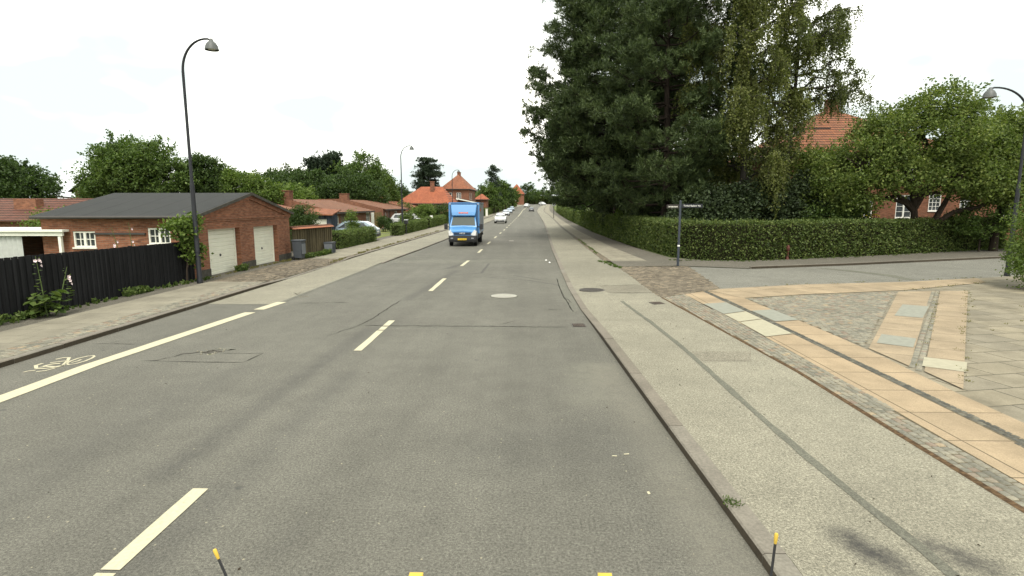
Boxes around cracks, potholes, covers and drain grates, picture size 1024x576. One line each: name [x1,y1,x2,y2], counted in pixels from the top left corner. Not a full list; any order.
crack [331,301,525,335]
